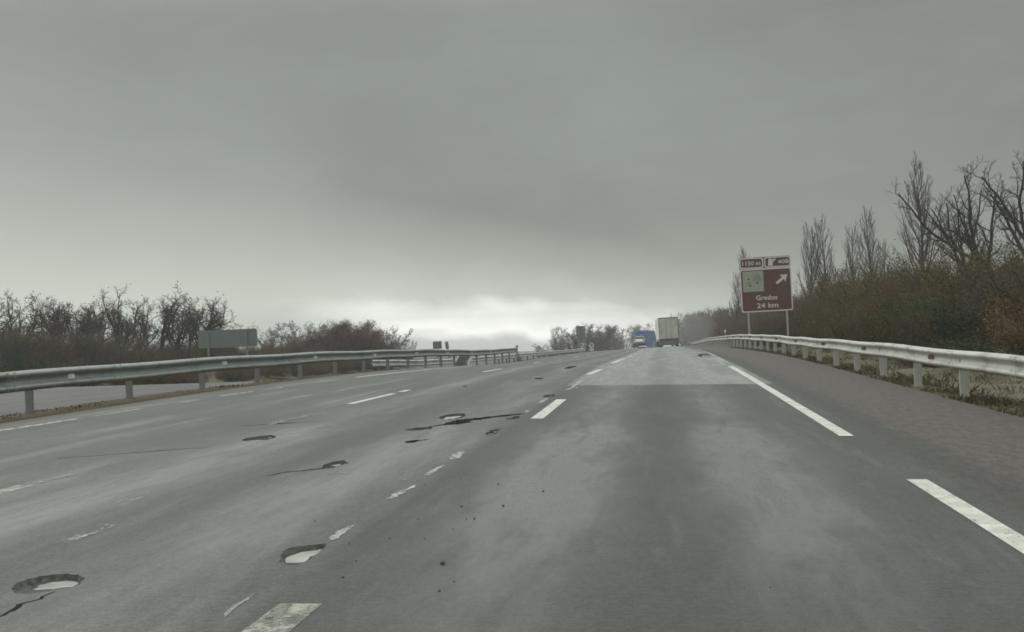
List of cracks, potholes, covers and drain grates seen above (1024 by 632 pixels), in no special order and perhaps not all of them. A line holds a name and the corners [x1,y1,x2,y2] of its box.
crack [0,592,54,617]
pothole [322,460,348,469]
pothole [11,574,85,594]
crack [56,447,210,459]
crack [415,413,524,442]
pothole [279,543,327,565]
